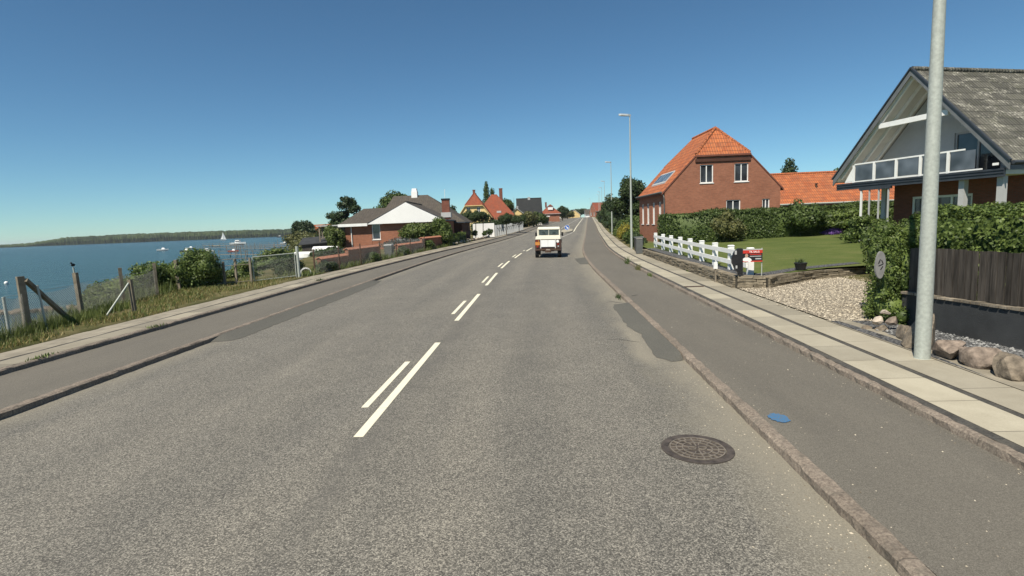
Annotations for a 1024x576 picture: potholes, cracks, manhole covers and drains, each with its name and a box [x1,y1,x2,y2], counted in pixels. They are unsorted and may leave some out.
manhole cover [661,434,735,465]
